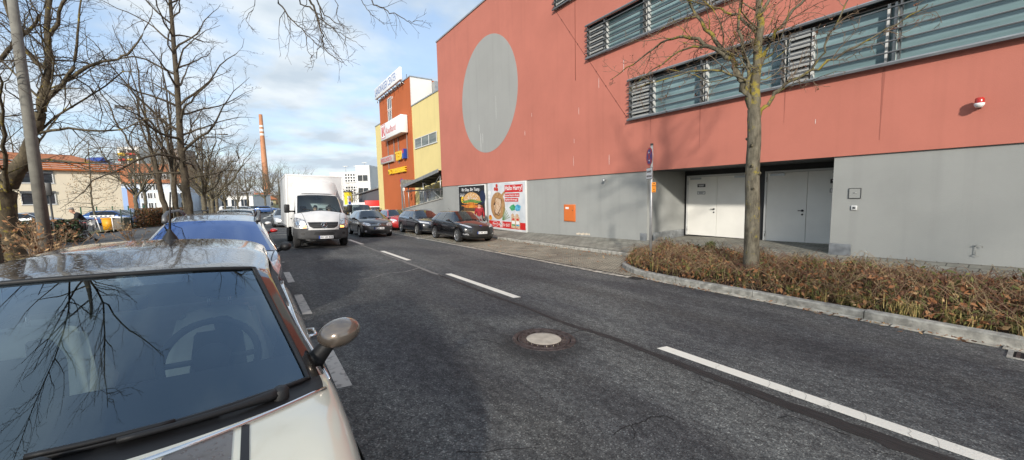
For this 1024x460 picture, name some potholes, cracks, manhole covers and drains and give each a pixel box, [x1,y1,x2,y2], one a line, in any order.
drain grate [1006,349,1024,361]
crack [613,415,674,439]
manhole cover [512,328,576,351]
